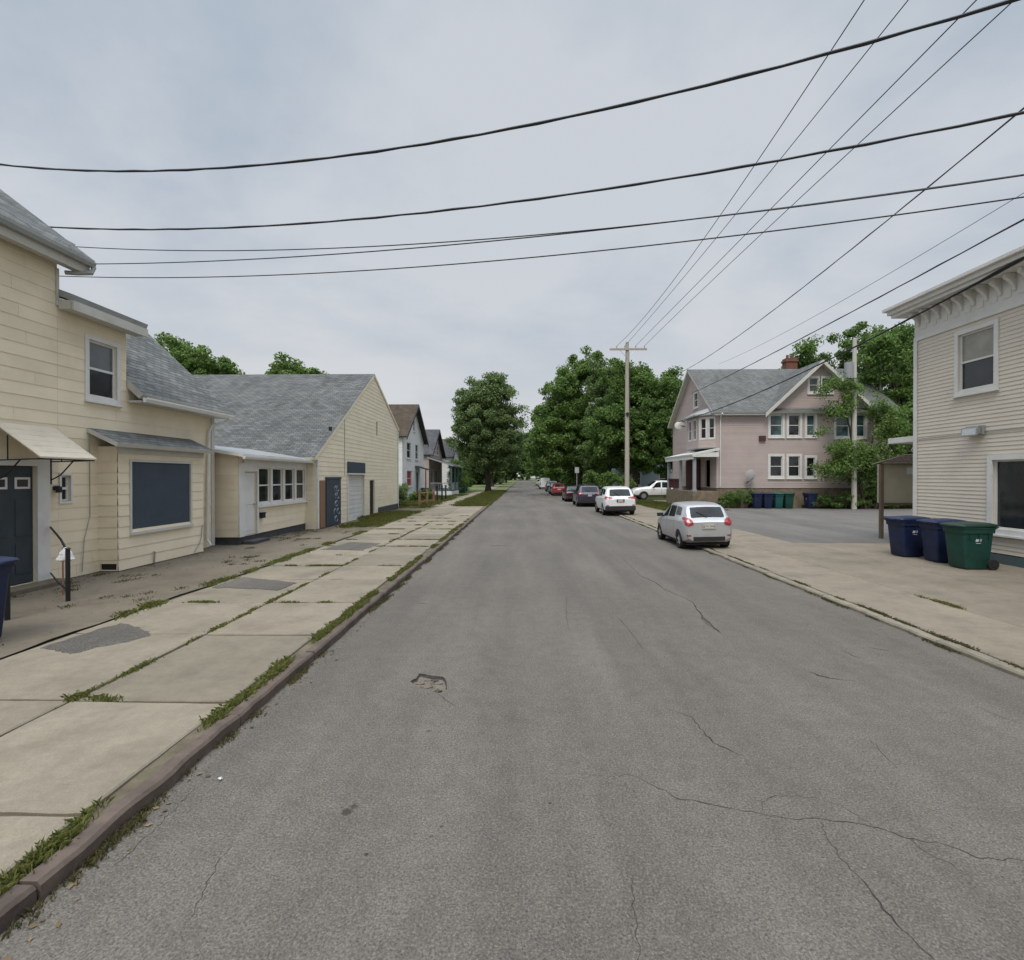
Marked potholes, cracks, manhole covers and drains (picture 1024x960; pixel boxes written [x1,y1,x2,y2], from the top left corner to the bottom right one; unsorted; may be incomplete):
crack [190,846,232,919]
crack [560,772,1024,960]
pothole [410,673,447,695]
crack [626,562,720,633]
